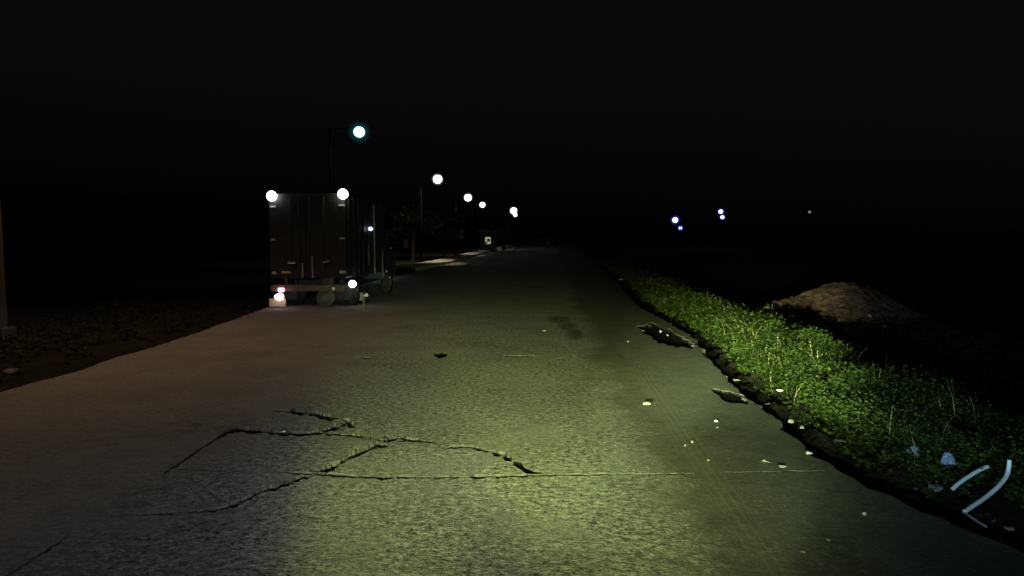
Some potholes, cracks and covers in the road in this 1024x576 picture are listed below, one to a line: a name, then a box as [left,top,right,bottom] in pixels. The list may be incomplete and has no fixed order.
crack [4,408,824,576]
pothole [636,322,695,349]
pothole [711,388,749,405]
